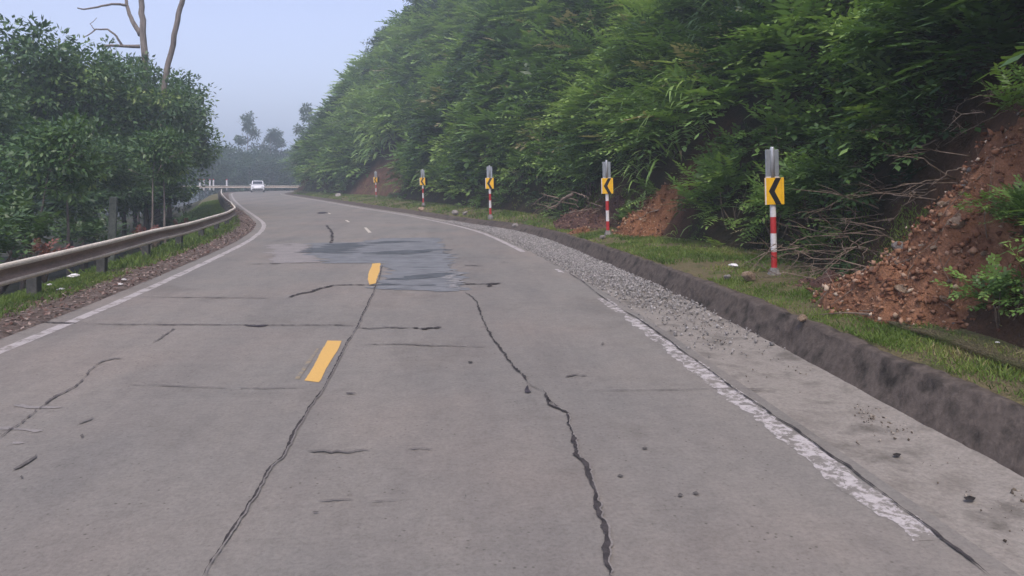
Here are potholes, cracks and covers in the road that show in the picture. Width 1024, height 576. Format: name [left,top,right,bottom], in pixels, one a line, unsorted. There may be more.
crack [202,266,614,576]
crack [0,357,116,437]
